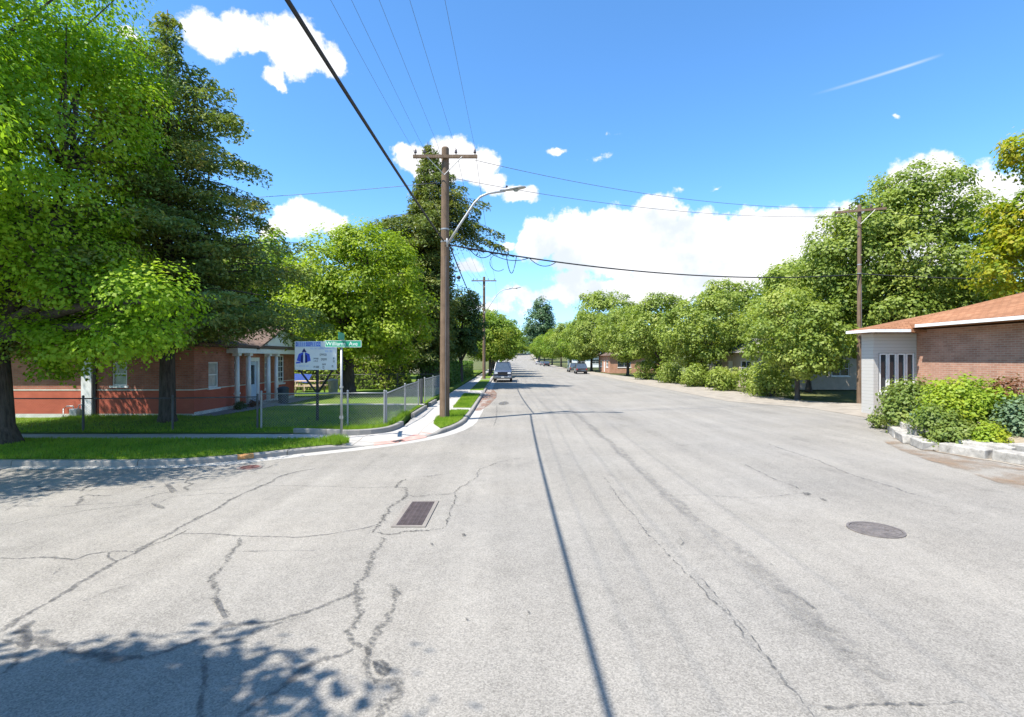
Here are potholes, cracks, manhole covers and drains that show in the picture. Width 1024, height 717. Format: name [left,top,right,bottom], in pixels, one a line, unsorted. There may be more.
crack [144,461,501,715]
manhole cover [846,521,907,539]
crack [613,490,962,715]
